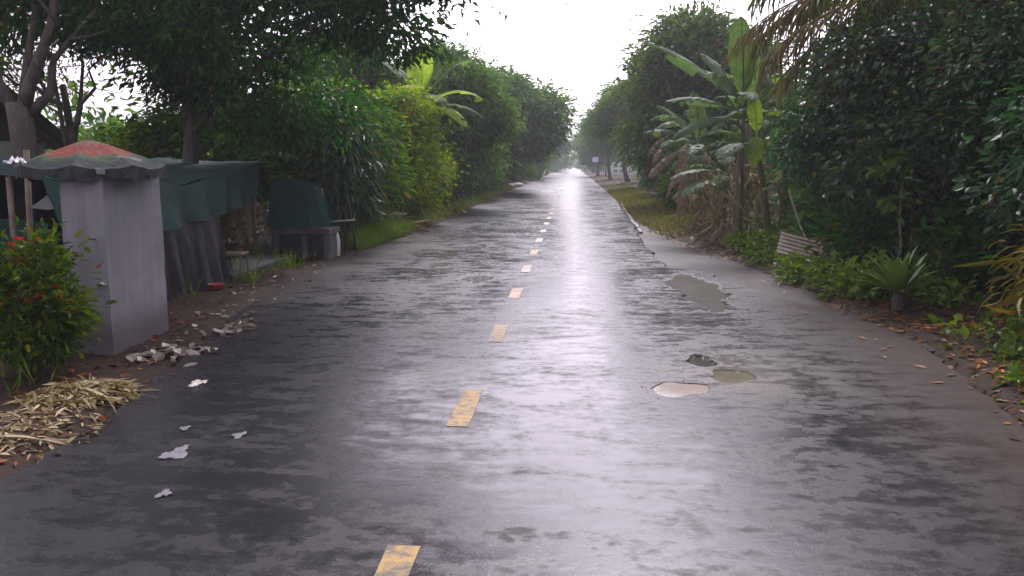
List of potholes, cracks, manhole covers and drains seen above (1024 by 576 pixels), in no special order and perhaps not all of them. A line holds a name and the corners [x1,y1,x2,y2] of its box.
pothole [641,380,714,397]
pothole [683,353,726,367]
pothole [701,367,757,384]
